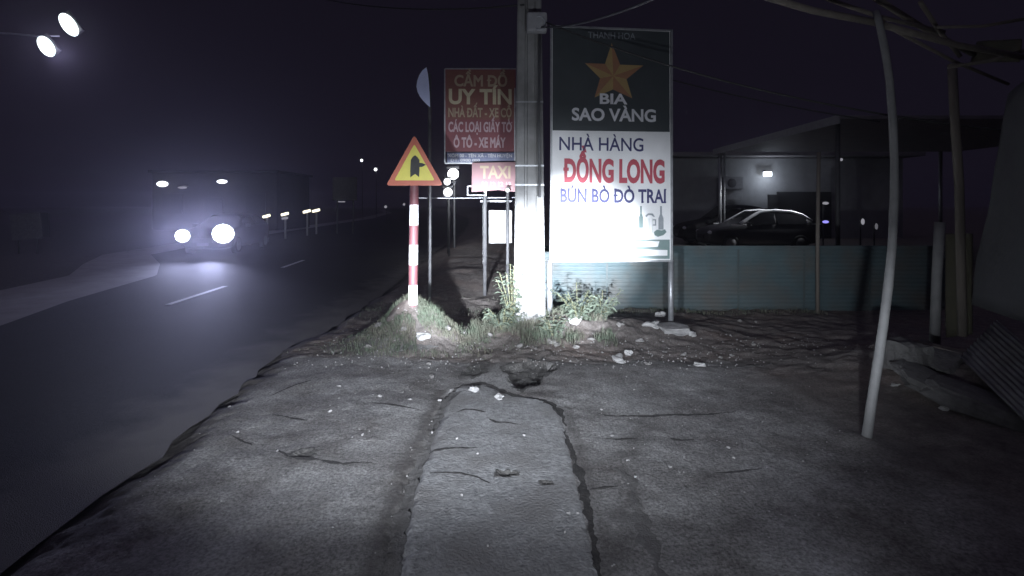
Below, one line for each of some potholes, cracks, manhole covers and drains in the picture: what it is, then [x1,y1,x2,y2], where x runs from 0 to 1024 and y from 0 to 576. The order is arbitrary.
crack [276,382,736,576]
pothole [498,357,562,393]
